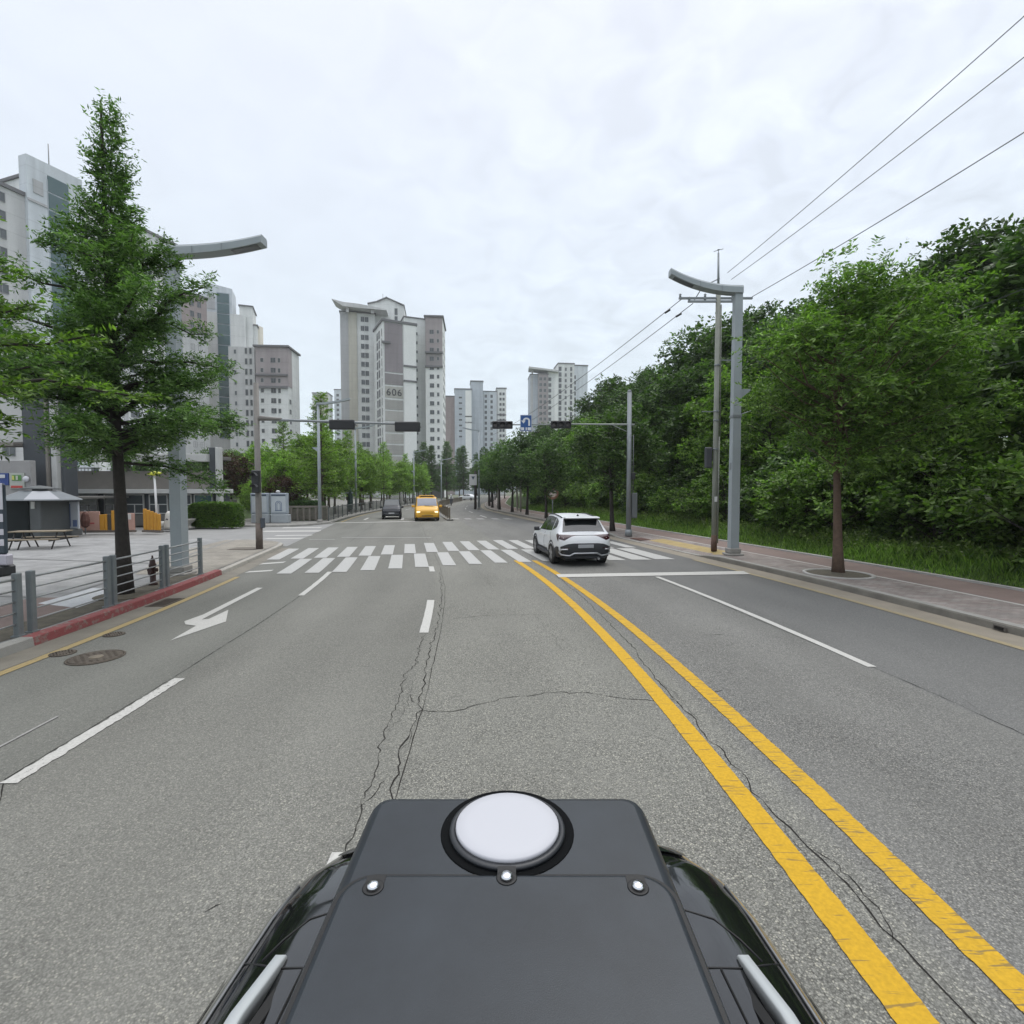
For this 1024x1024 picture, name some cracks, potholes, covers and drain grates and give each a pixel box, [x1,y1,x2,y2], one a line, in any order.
manhole cover [48,649,77,657]
manhole cover [64,649,126,666]
crack [345,523,977,1024]
